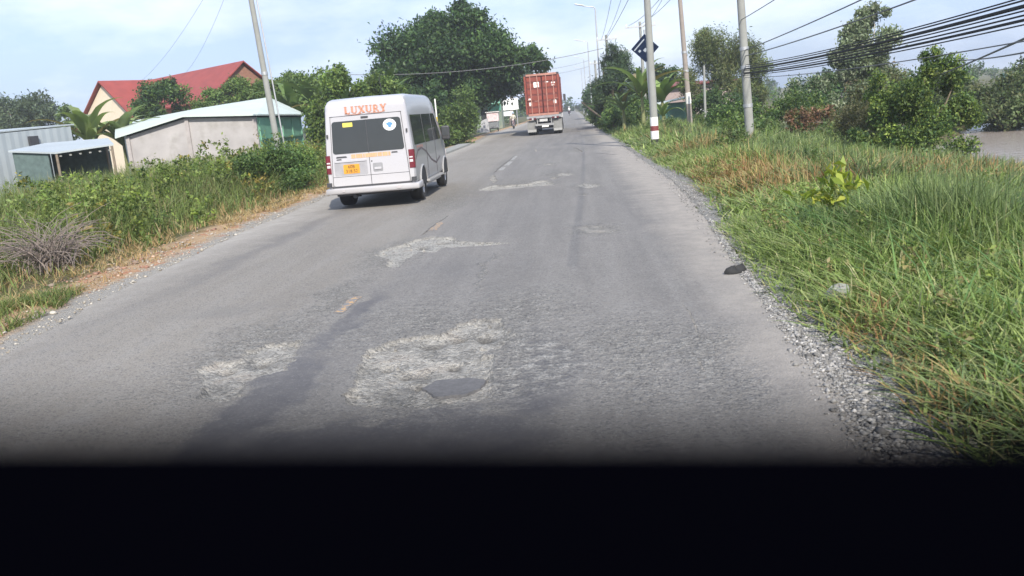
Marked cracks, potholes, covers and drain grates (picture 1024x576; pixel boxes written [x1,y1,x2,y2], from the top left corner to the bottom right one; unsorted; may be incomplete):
pothole [341,318,519,408]
